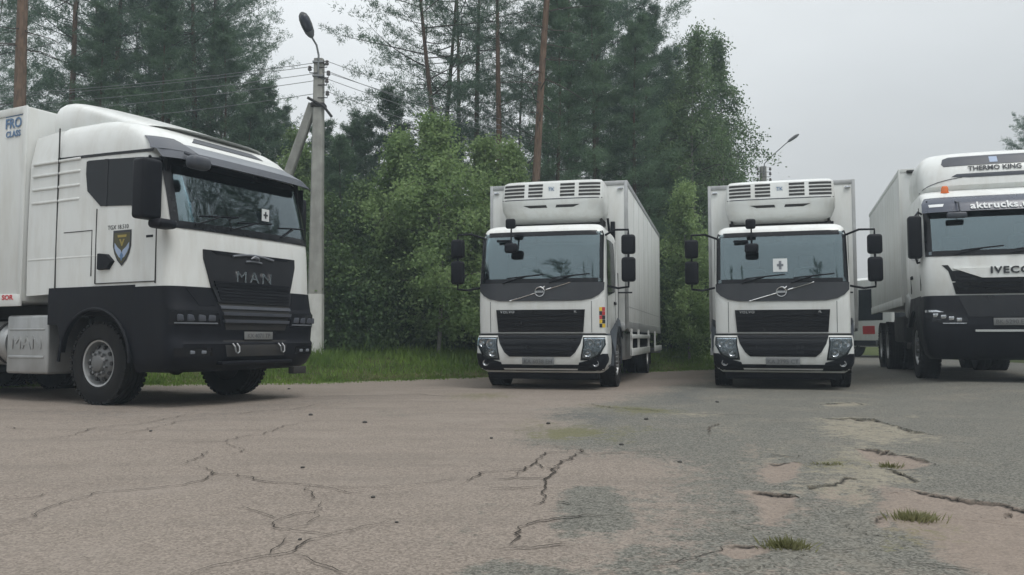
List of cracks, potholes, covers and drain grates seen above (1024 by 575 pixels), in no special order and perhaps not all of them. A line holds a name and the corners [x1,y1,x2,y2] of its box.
crack [4,394,483,574]
pothole [833,446,958,474]
crack [467,445,660,549]
pothole [693,538,808,569]
pothole [739,459,827,488]
pothole [872,484,1024,527]
pothole [801,416,965,441]
pothole [728,488,824,534]
